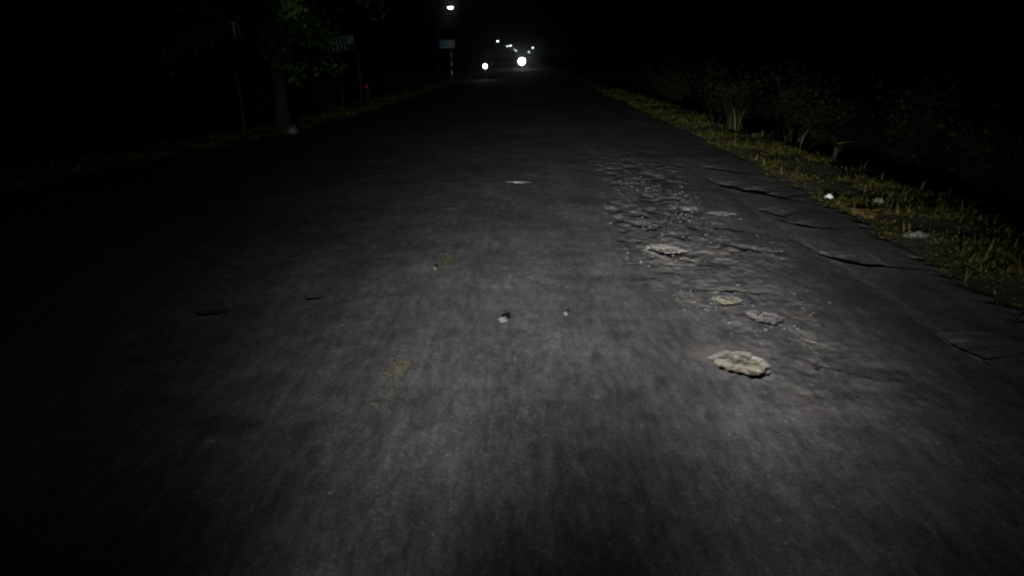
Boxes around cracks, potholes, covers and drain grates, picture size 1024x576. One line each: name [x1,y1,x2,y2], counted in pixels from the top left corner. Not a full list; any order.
crack [668,165,816,229]
crack [934,332,990,362]
pothole [303,293,326,301]
pothole [703,349,776,382]
crack [811,250,899,269]
pothole [707,294,748,308]
pothole [742,308,789,328]
pothole [190,305,232,318]
pothole [642,244,692,257]
crack [613,187,642,210]
